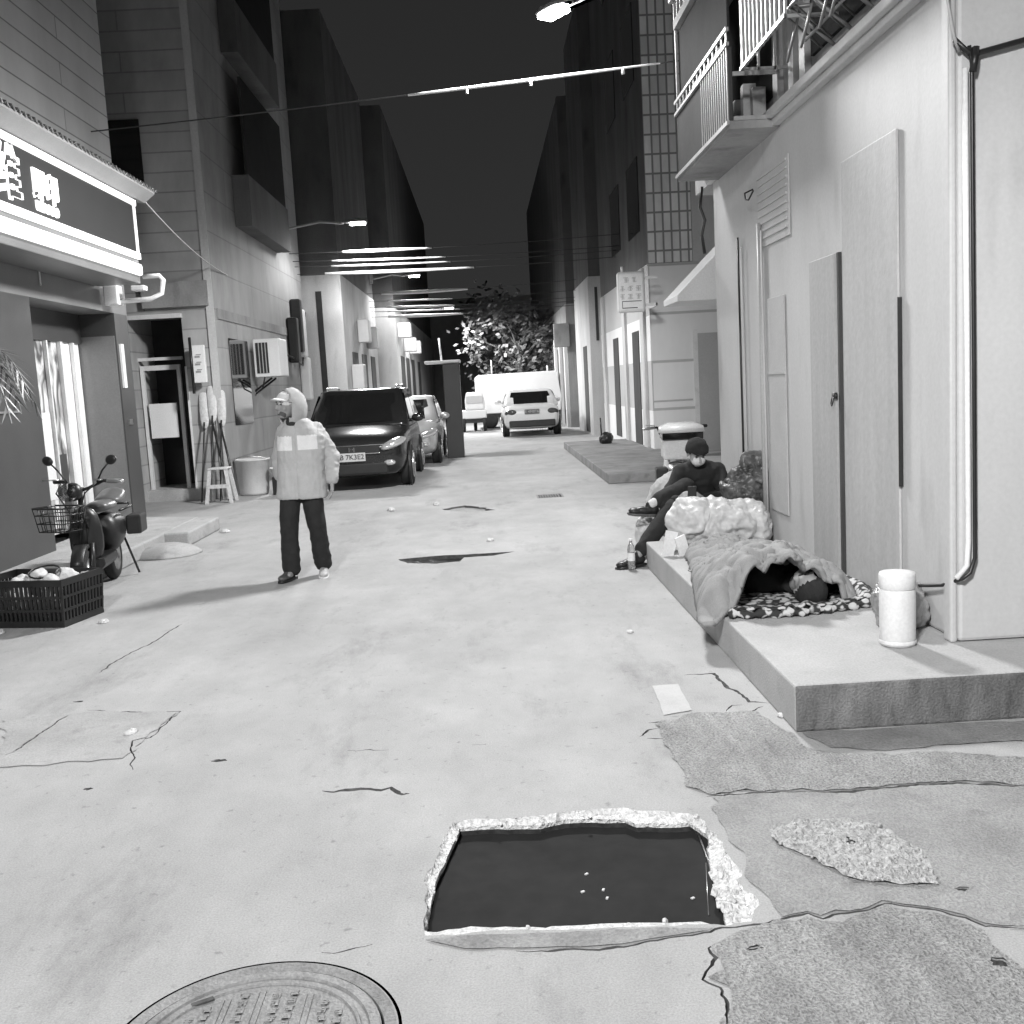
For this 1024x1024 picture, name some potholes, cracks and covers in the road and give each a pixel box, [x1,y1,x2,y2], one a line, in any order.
crack [21,603,204,748]
crack [98,710,181,769]
crack [324,787,410,795]
pothole [398,551,514,564]
crack [687,673,765,711]
pothole [423,807,759,935]
manhole cover [130,962,399,1024]
